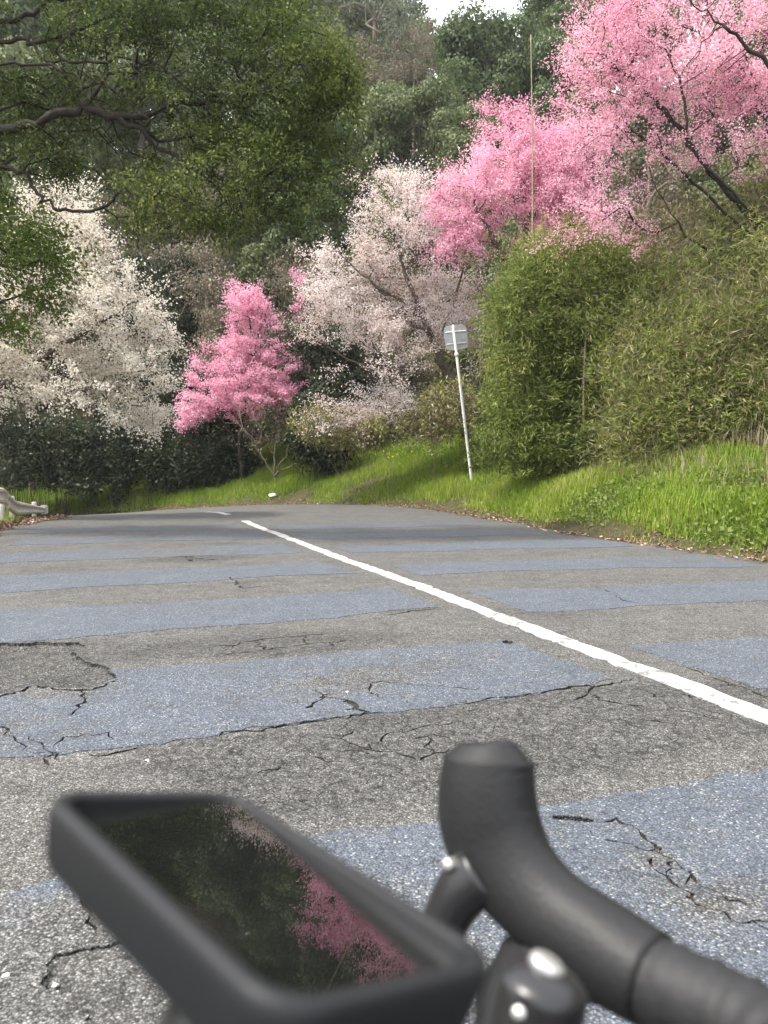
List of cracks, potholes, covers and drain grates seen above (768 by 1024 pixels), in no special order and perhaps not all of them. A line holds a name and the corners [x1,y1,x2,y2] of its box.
crack [475,680,719,723]
crack [6,681,113,715]
crack [604,819,767,928]
crack [220,681,471,774]
crack [213,634,360,655]
crack [1,727,137,766]
